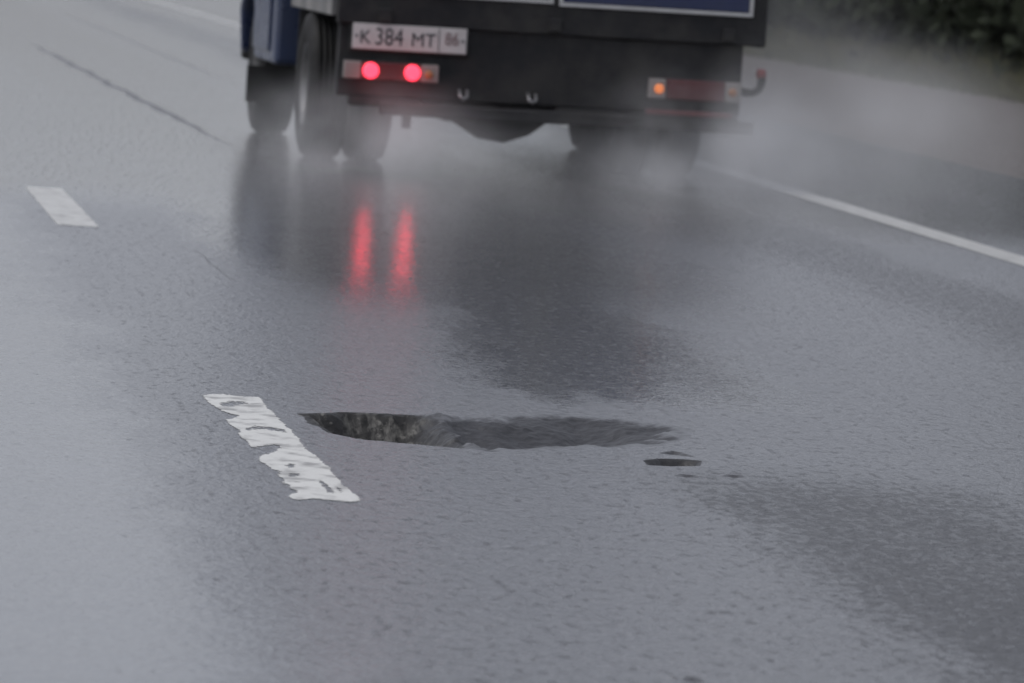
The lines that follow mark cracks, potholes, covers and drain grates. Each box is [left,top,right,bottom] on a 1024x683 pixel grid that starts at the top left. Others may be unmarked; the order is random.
crack [30,12,235,147]
pothole [297,412,697,452]
